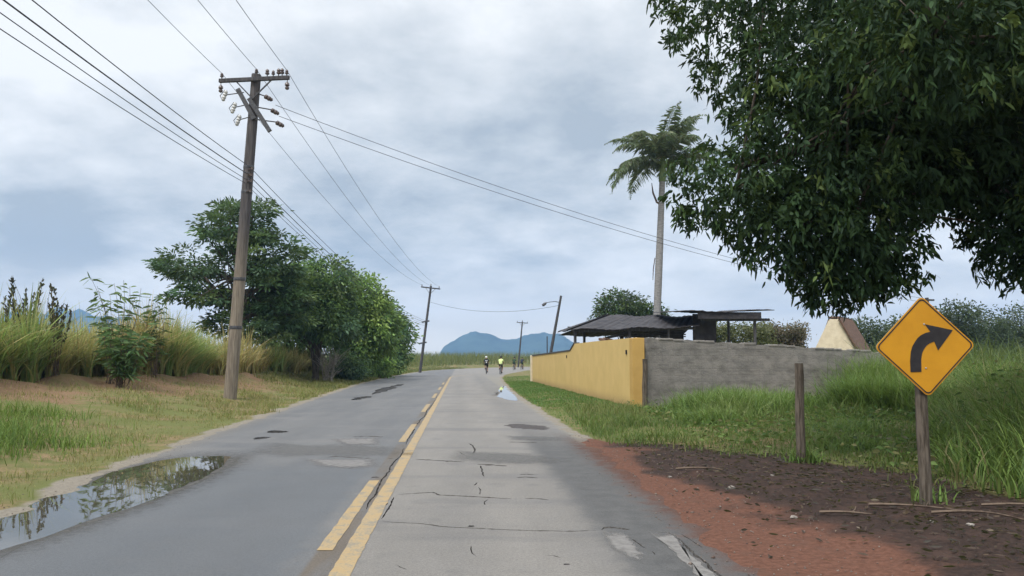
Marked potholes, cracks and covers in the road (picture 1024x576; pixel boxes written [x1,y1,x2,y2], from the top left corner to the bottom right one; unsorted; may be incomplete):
crack [412,443,547,505]
crack [382,498,655,555]
